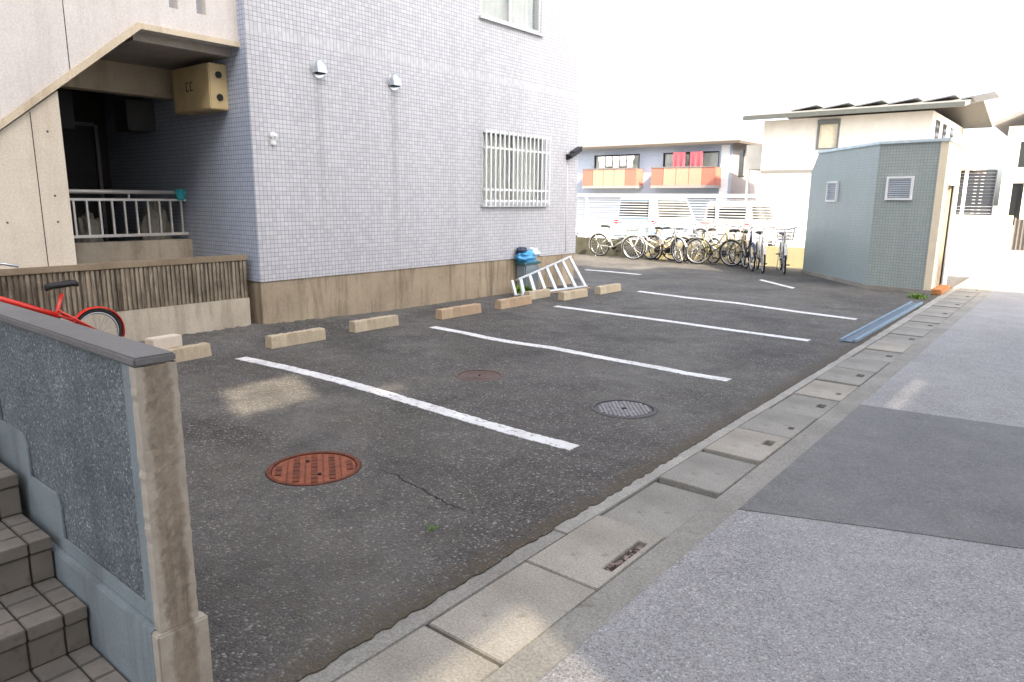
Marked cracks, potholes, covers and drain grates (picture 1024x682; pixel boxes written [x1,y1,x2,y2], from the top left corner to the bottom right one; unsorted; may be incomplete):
manhole cover [266,451,361,486]
manhole cover [591,399,657,419]
manhole cover [455,369,504,381]
